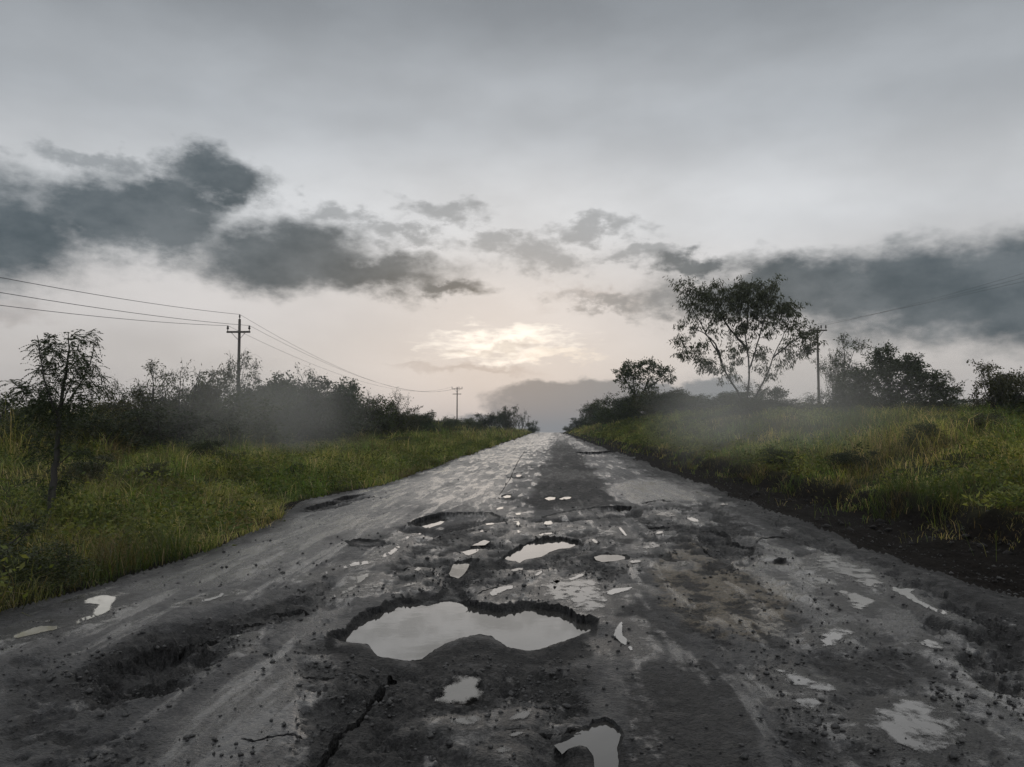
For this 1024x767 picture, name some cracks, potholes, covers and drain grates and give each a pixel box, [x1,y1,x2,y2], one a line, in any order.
pothole [551,717,625,767]
pothole [324,587,600,683]
pothole [101,642,215,694]
pothole [303,501,342,512]
crack [240,670,398,767]
pothole [98,678,179,705]
pothole [332,494,366,504]
pothole [344,538,387,548]
pothole [432,674,488,715]
pothole [407,512,501,538]
pothole [495,535,585,570]
